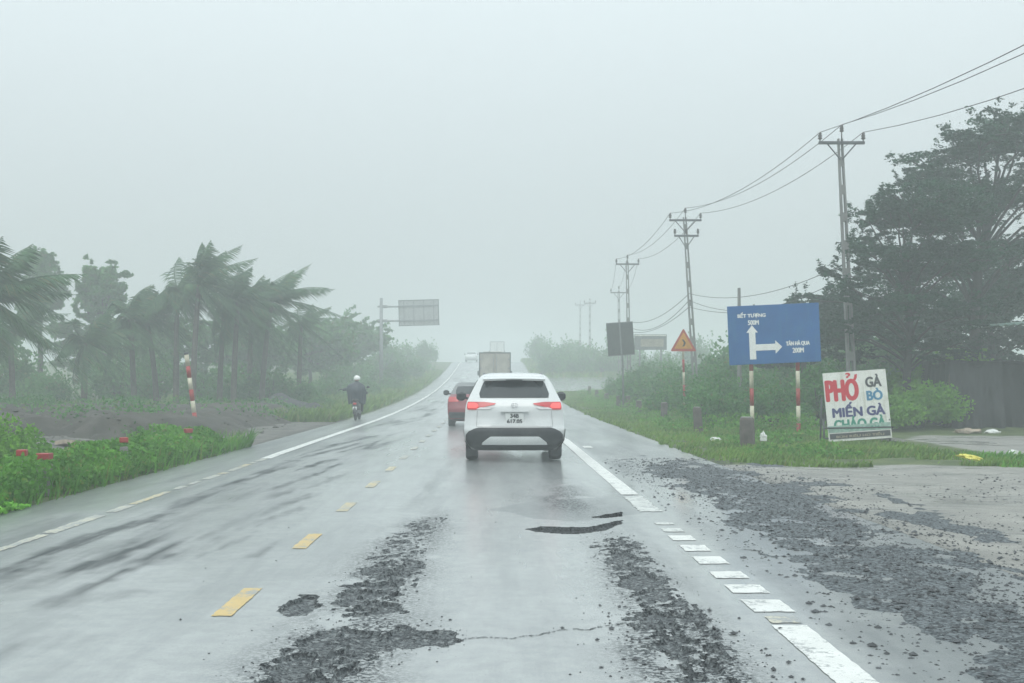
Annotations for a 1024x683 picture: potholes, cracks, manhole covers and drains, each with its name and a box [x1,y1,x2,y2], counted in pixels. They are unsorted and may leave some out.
crack [462,622,627,640]
pothole [276,594,324,617]
pothole [330,515,448,621]
pothole [525,520,623,534]
pothole [589,537,753,683]
